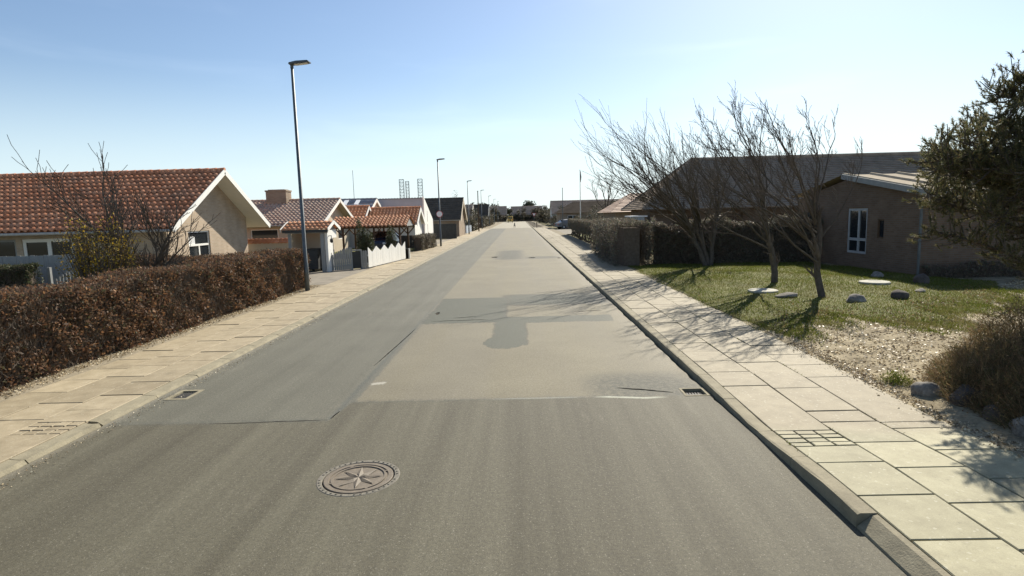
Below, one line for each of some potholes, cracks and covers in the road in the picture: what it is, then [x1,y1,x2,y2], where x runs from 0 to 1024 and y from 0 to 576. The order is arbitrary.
drain grate [164,389,205,400]
drain grate [678,388,710,396]
manhole cover [316,460,400,497]
